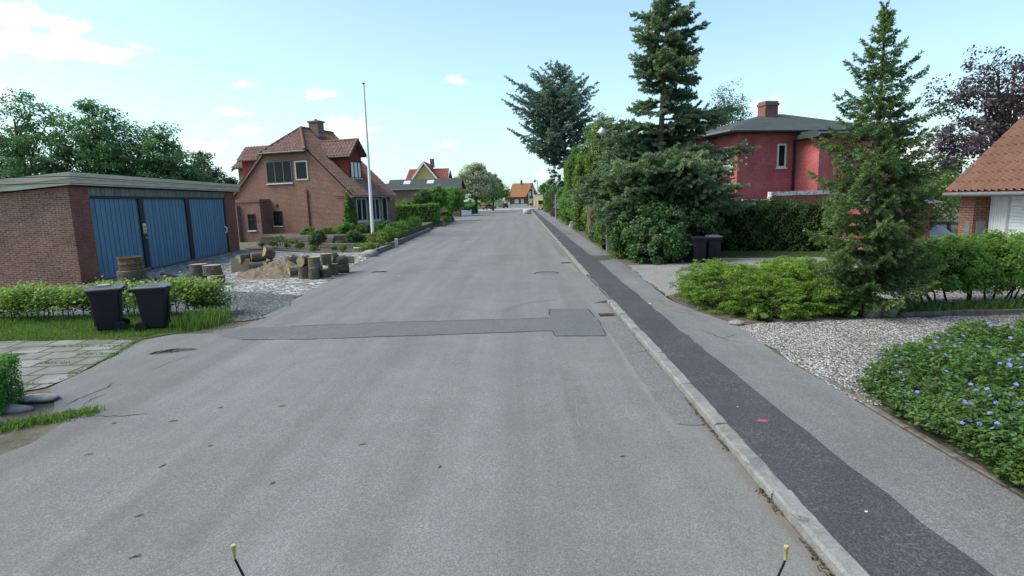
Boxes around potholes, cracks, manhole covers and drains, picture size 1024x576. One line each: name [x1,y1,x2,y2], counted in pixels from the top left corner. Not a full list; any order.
crack [67,382,147,417]
